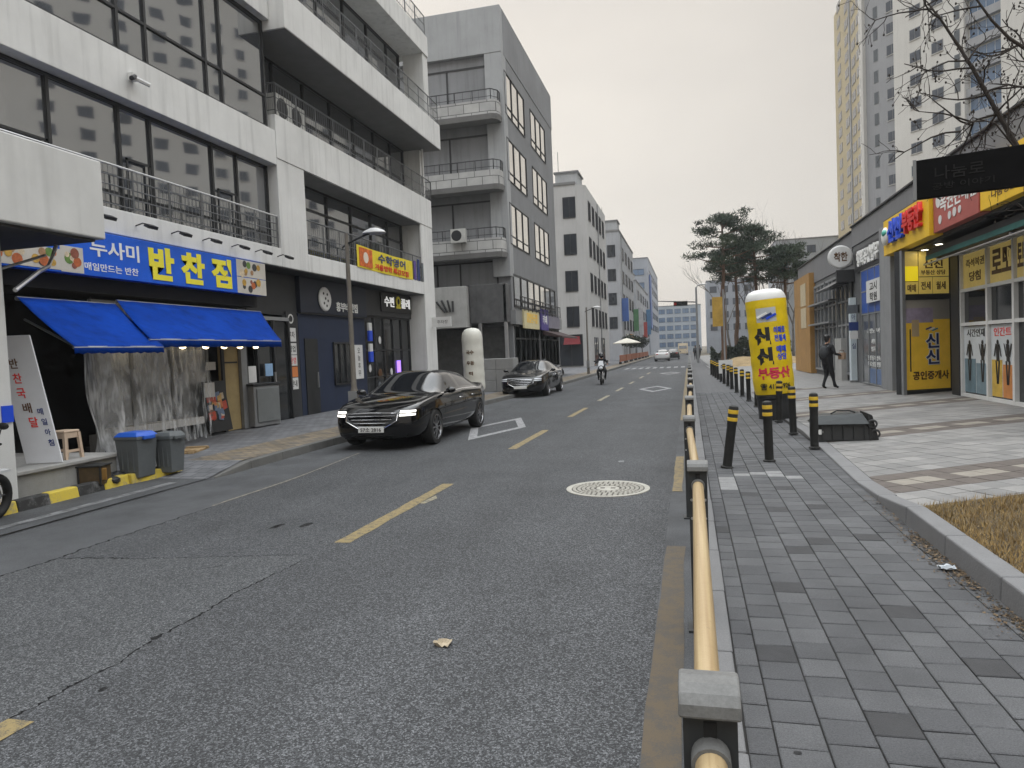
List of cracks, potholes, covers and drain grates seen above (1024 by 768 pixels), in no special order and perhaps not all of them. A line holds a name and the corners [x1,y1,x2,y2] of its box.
manhole cover [566,480,650,497]
crack [8,555,304,719]
